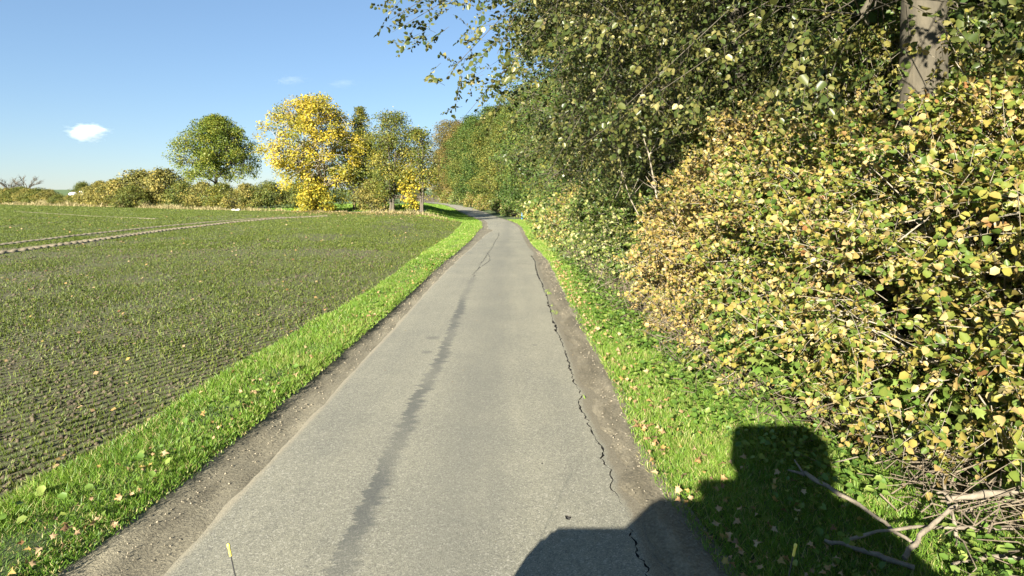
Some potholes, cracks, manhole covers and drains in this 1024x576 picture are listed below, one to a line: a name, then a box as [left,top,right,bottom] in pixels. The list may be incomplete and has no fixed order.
crack [531,256,622,504]
crack [629,527,650,576]
